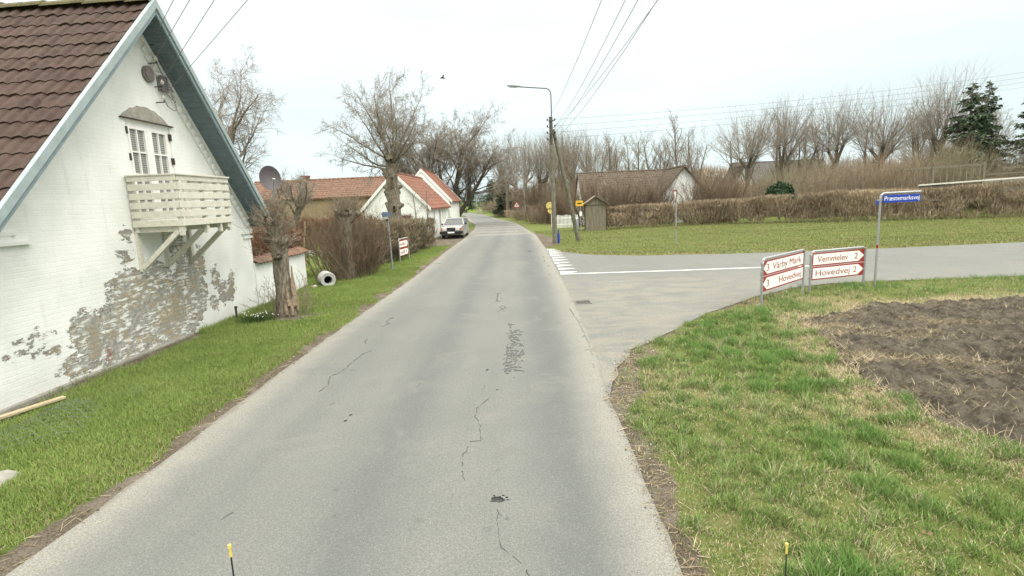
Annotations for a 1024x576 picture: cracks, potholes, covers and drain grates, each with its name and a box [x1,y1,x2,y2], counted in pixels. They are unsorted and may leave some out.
crack [497,510,530,576]
crack [319,318,393,405]
crack [450,386,489,501]
crack [495,293,524,378]
